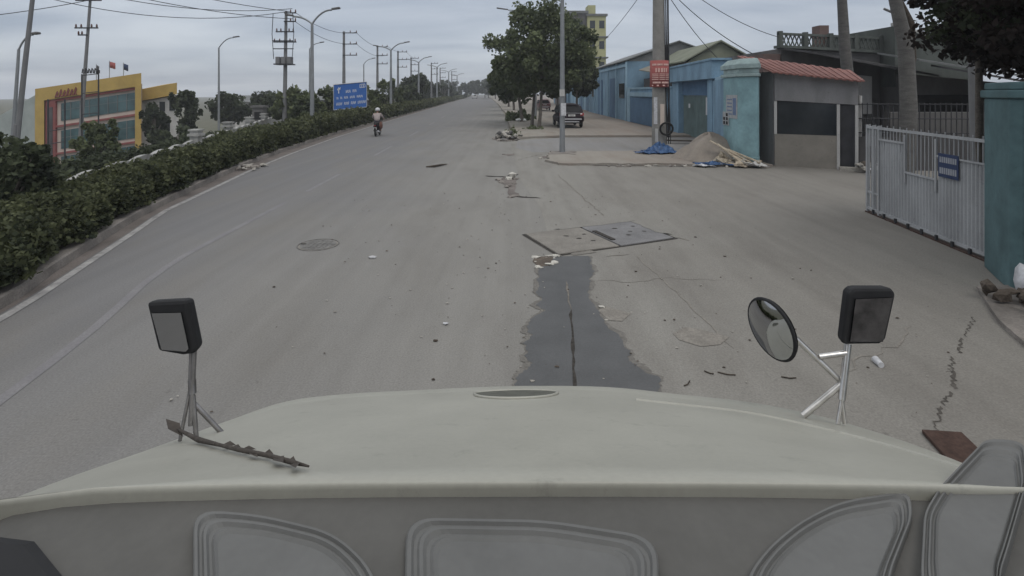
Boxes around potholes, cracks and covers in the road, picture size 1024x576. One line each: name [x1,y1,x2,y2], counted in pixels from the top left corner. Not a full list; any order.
crack [933,317,976,431]
manhole cover [296,239,339,251]
pothole [495,177,520,198]
